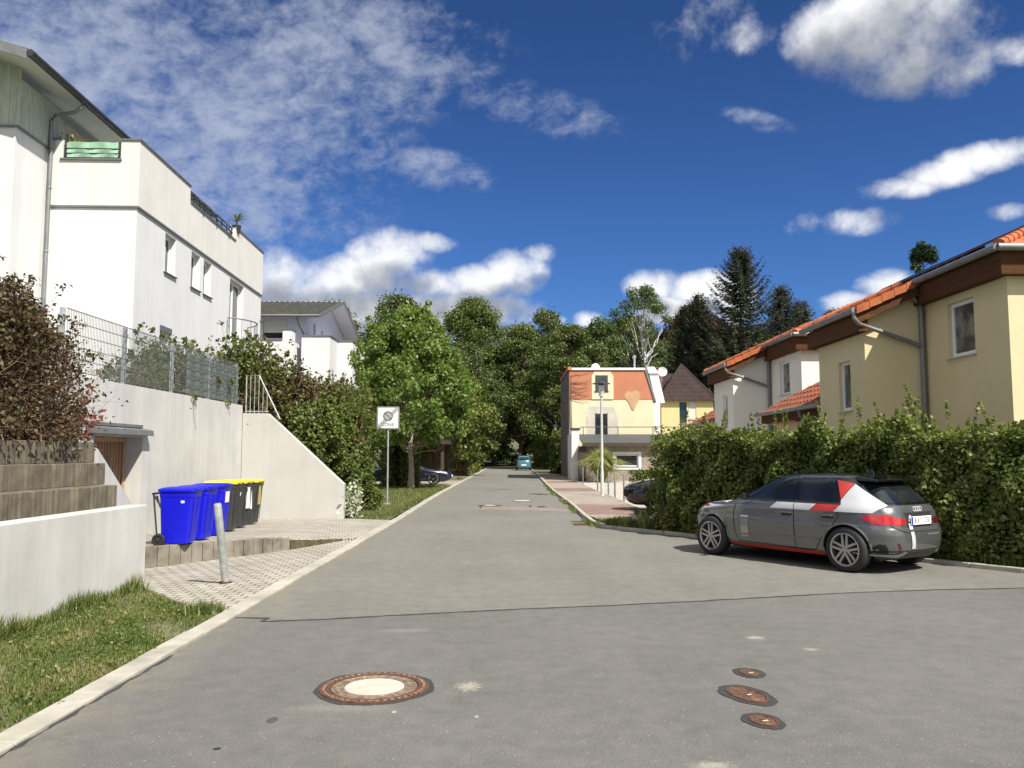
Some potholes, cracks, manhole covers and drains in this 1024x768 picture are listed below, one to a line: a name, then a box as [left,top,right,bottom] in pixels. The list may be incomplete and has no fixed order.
utility cover [733,668,766,679]
manhole cover [313,672,434,706]
utility cover [717,685,778,707]
utility cover [741,713,786,730]
